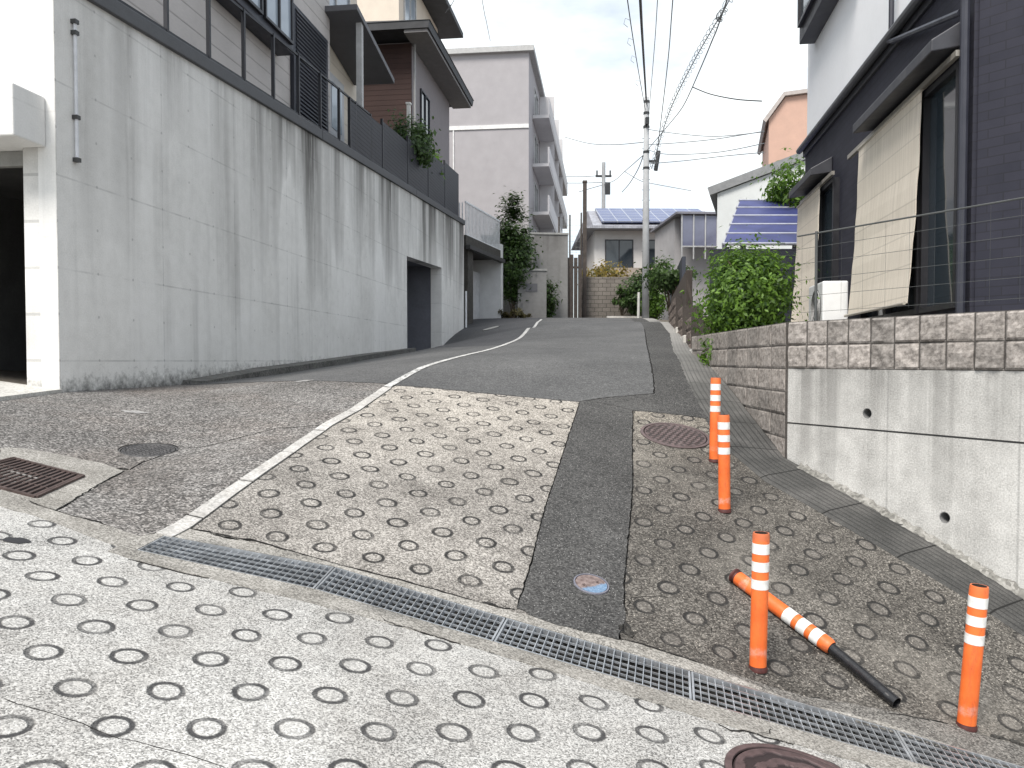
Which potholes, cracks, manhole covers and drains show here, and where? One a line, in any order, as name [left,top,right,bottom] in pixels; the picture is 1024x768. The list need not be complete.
manhole cover [640,422,710,449]
crack [718,724,794,745]
drain grate [691,671,914,762]
drain grate [0,457,85,498]
drain grate [896,730,1024,768]
crack [29,471,124,526]
drain grate [494,618,692,700]
manhole cover [724,743,840,768]
manhole cover [118,443,178,457]
drain grate [138,536,334,589]
manhole cover [573,573,609,595]
drain grate [315,567,505,641]
